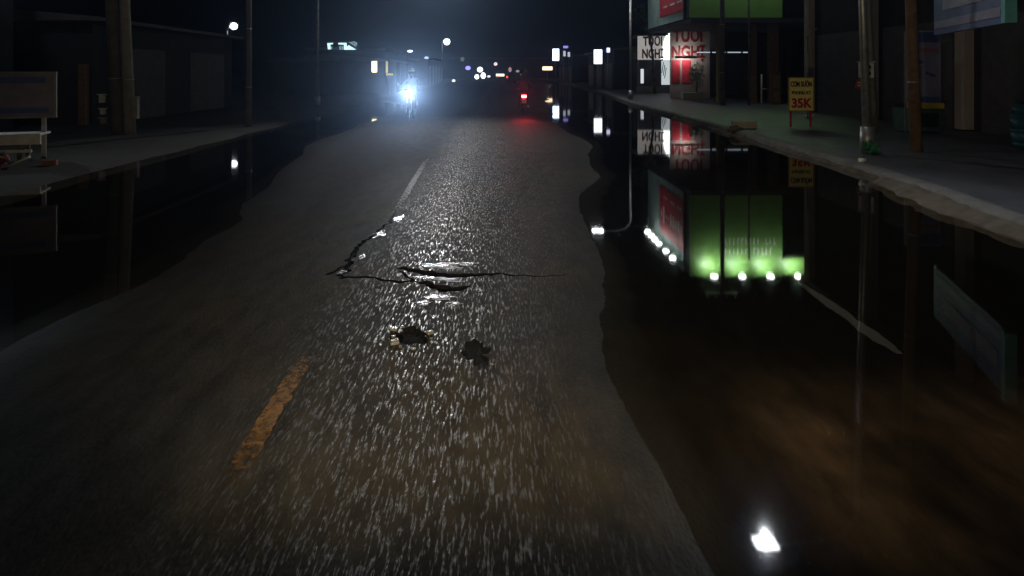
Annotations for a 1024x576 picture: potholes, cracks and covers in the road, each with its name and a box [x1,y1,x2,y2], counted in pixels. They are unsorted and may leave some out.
crack [325,207,566,307]
pothole [382,325,434,350]
pothole [460,339,494,370]
